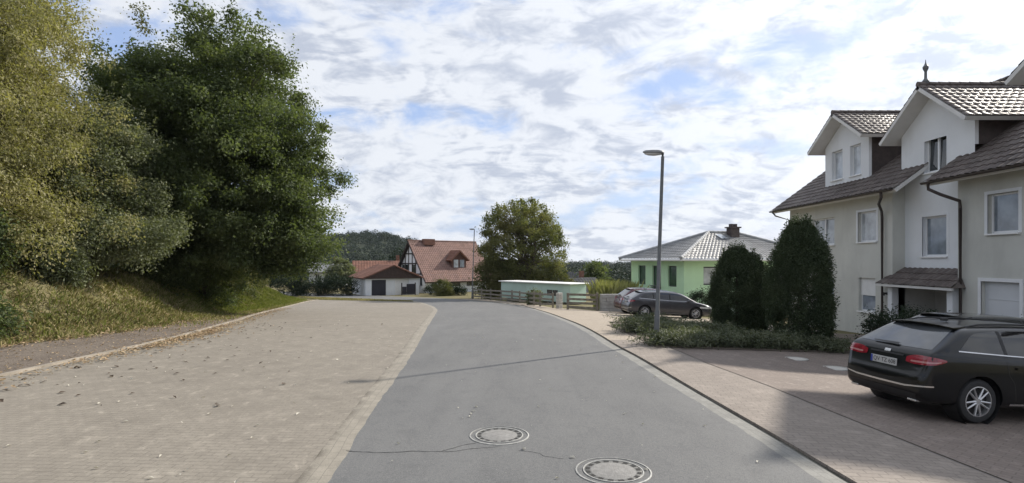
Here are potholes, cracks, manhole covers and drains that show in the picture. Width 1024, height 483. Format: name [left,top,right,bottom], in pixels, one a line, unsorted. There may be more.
manhole cover [575,457,652,483]
crack [346,443,562,459]
manhole cover [469,426,529,445]
